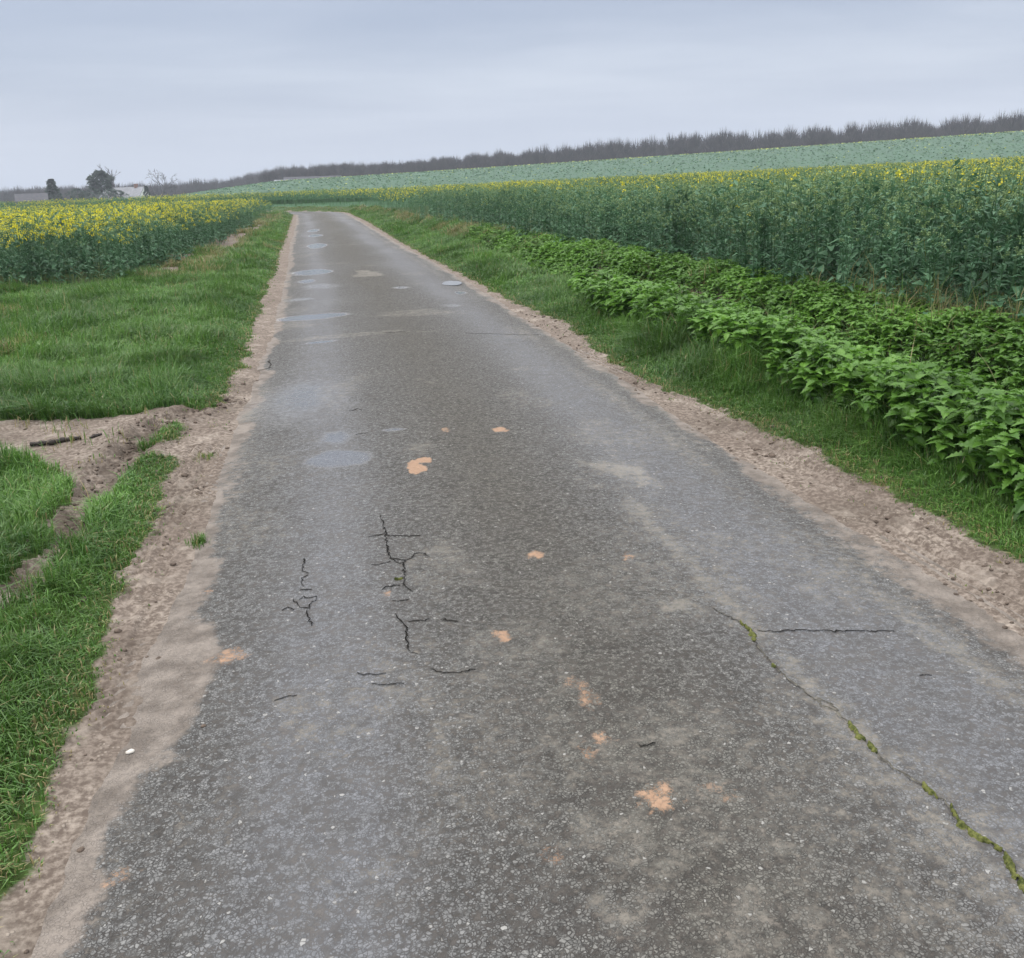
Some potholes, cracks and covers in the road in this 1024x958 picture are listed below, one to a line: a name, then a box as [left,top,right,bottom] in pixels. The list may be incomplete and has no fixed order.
crack [712,607,1024,894]
crack [282,558,317,626]
crack [368,513,476,674]
crack [357,672,404,686]
